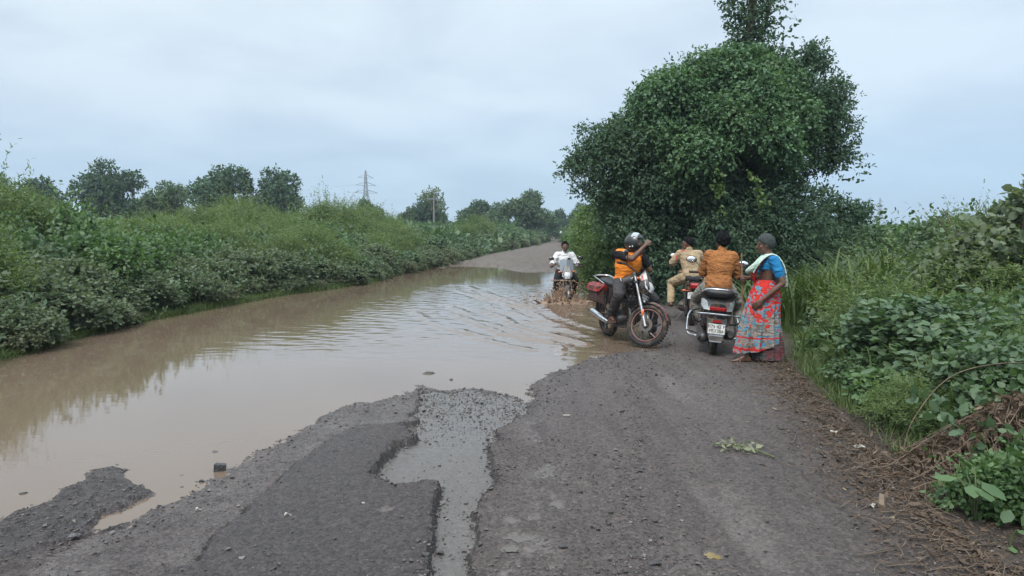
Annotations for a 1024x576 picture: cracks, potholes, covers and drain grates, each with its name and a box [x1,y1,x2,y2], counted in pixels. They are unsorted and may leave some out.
pothole [369,389,533,576]
pothole [497,531,542,549]
